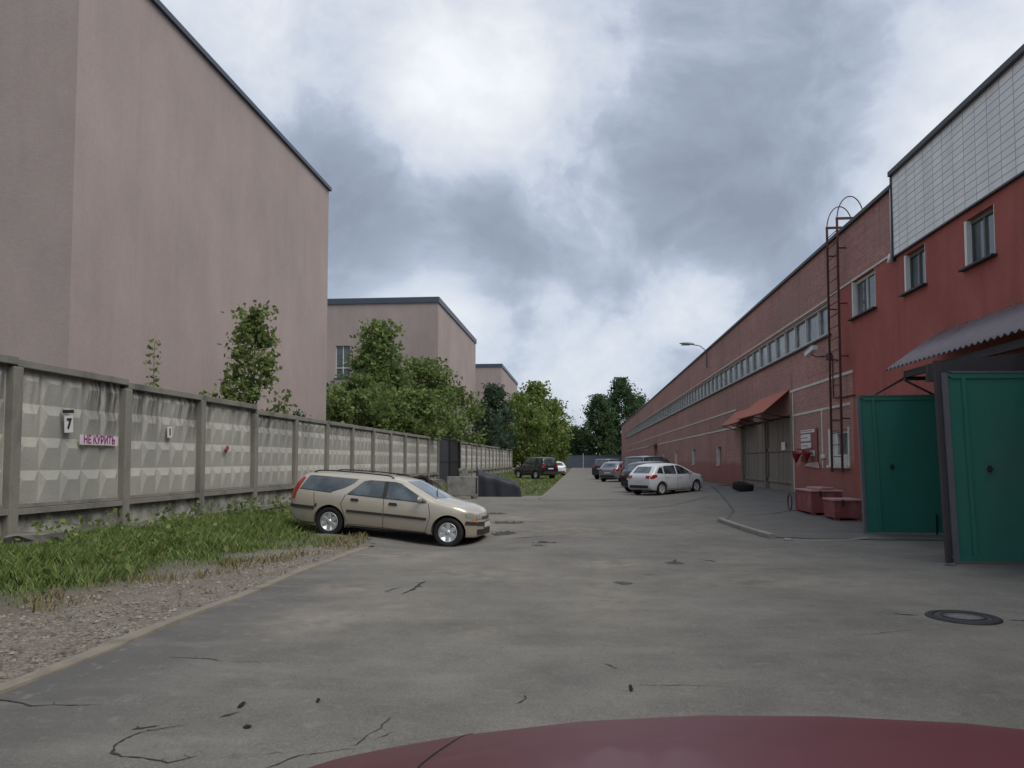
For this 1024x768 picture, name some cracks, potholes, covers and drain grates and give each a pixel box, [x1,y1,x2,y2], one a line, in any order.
crack [110,724,203,763]
crack [264,716,392,768]
manhole cover [924,610,1004,625]
